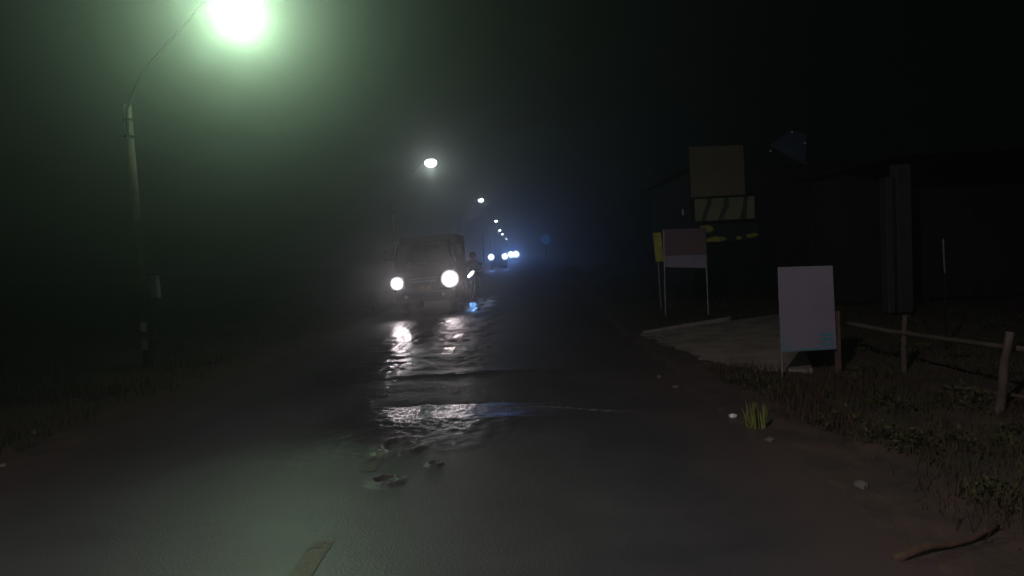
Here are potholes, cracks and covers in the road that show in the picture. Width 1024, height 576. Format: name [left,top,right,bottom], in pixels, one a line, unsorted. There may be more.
pothole [379,437,423,451]
pothole [371,475,402,483]
